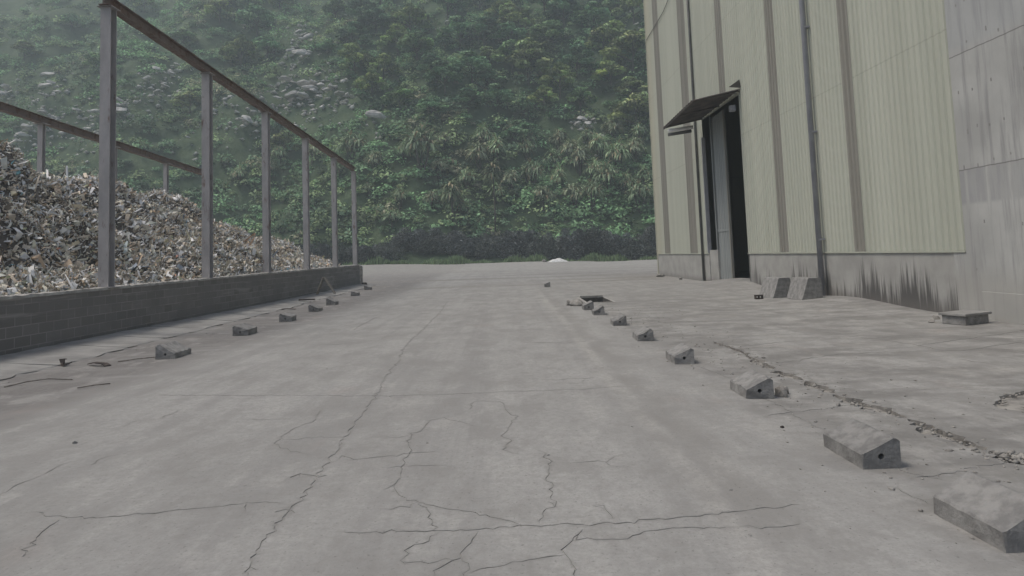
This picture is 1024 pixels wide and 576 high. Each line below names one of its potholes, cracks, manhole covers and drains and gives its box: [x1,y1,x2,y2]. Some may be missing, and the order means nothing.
crack [701,331,1024,504]
crack [8,303,798,576]
